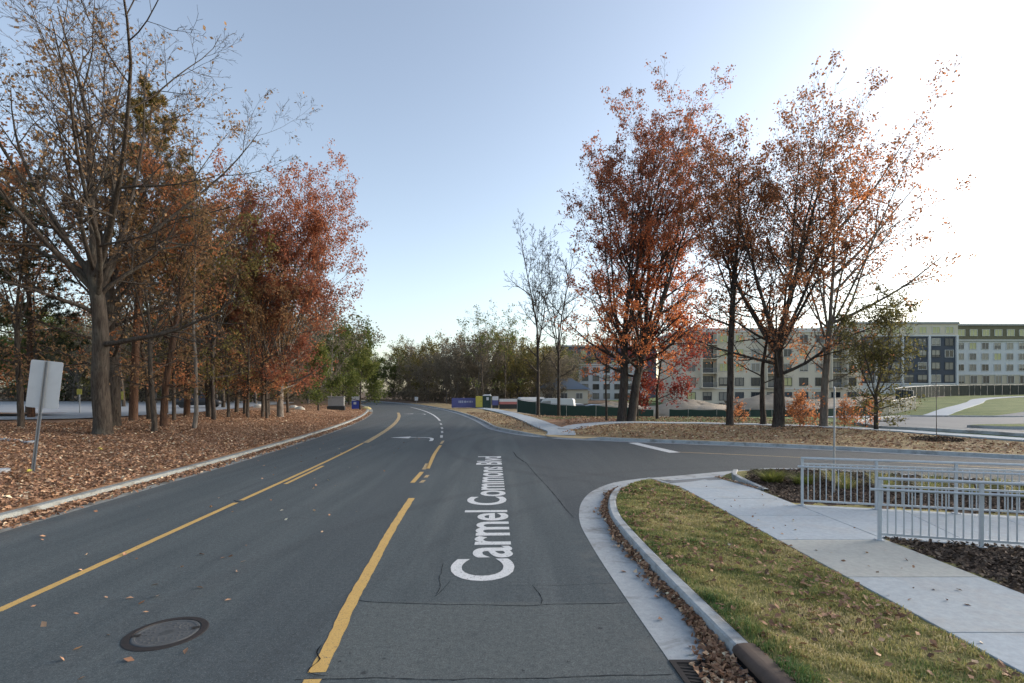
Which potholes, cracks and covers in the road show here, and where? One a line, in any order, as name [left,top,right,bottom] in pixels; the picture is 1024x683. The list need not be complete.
crack [360,565,608,606]
manhole cover [120,617,209,652]
